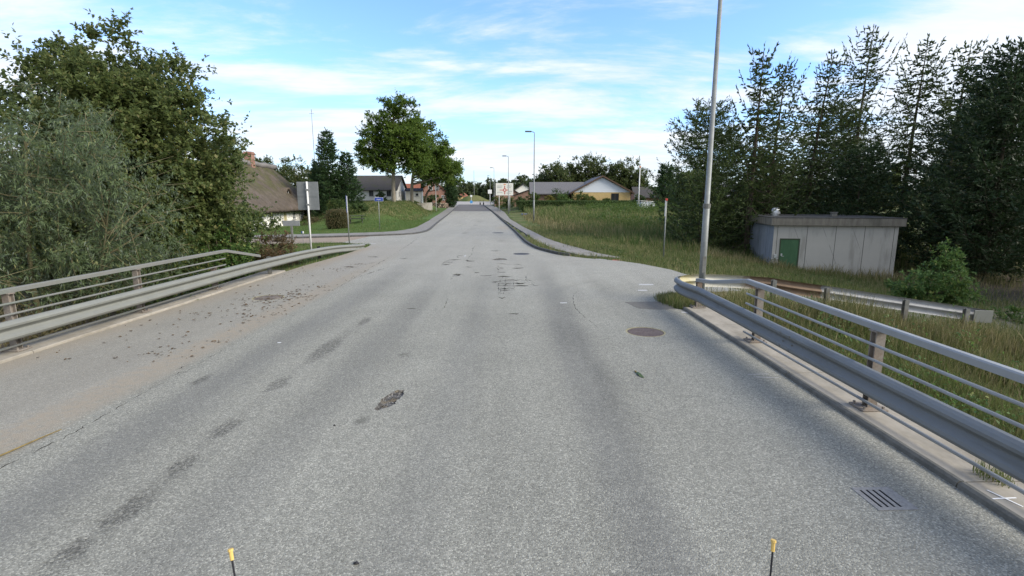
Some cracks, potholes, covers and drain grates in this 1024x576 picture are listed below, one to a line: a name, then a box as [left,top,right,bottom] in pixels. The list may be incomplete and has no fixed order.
crack [444,259,531,314]
manhole cover [625,327,666,337]
pothole [374,390,404,411]
drain grate [851,487,920,511]
